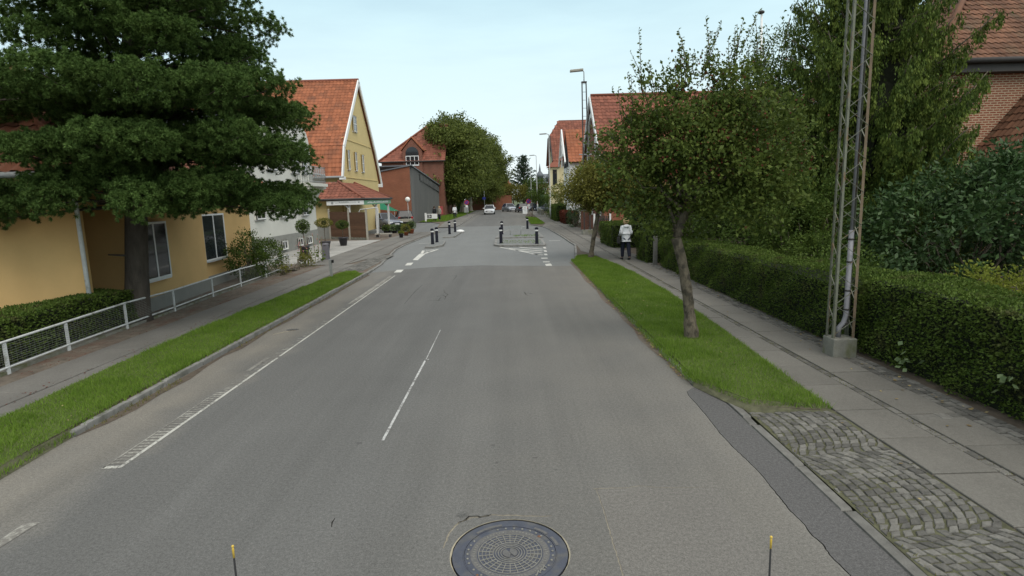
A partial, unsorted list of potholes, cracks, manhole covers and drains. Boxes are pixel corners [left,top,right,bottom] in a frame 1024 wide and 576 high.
manhole cover [450,519,570,576]
crack [443,514,552,548]
